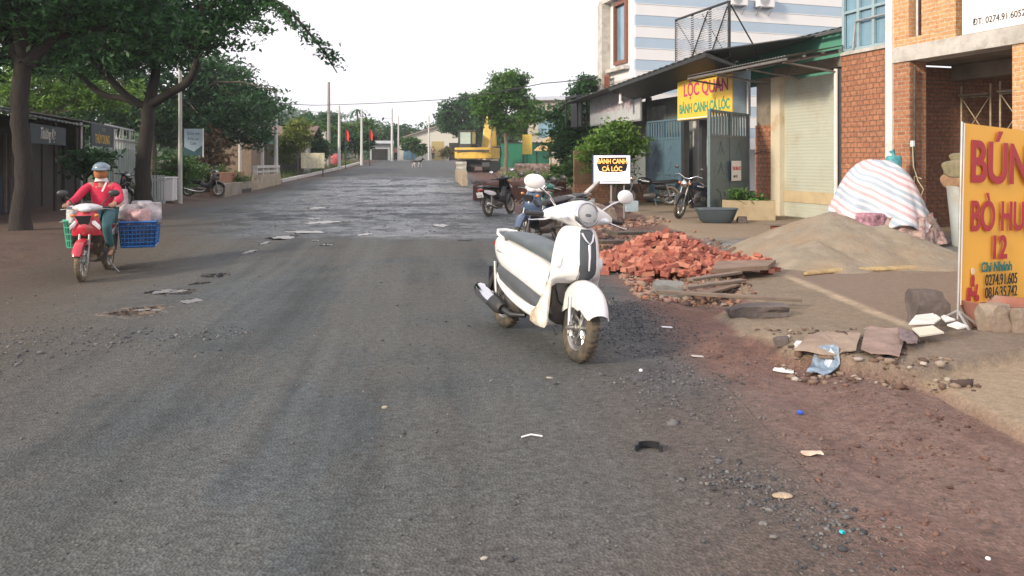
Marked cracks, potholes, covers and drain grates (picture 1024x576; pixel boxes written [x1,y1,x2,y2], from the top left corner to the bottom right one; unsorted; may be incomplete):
pothole [134,288,205,296]
pothole [194,271,237,280]
pothole [95,304,175,319]
